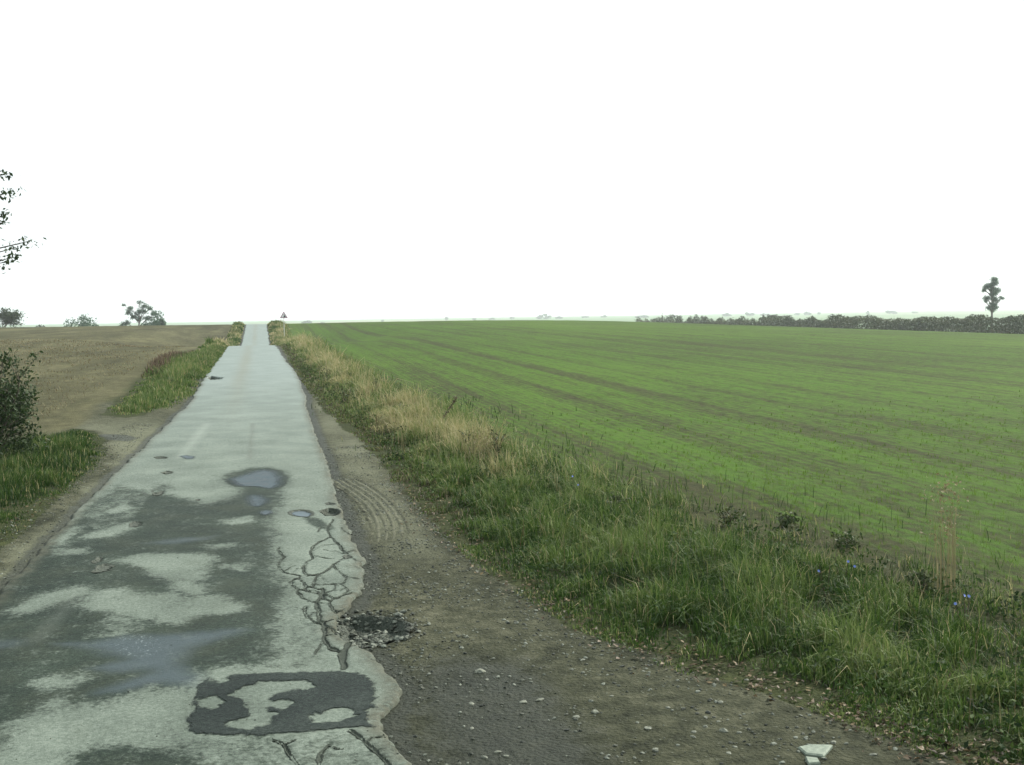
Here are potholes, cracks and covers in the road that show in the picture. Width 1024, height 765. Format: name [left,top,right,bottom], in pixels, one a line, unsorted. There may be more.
pothole [319,508,341,516]
crack [277,519,361,670]
crack [269,729,392,765]
pothole [334,614,414,649]
pothole [288,509,314,517]
pothole [91,563,116,573]
